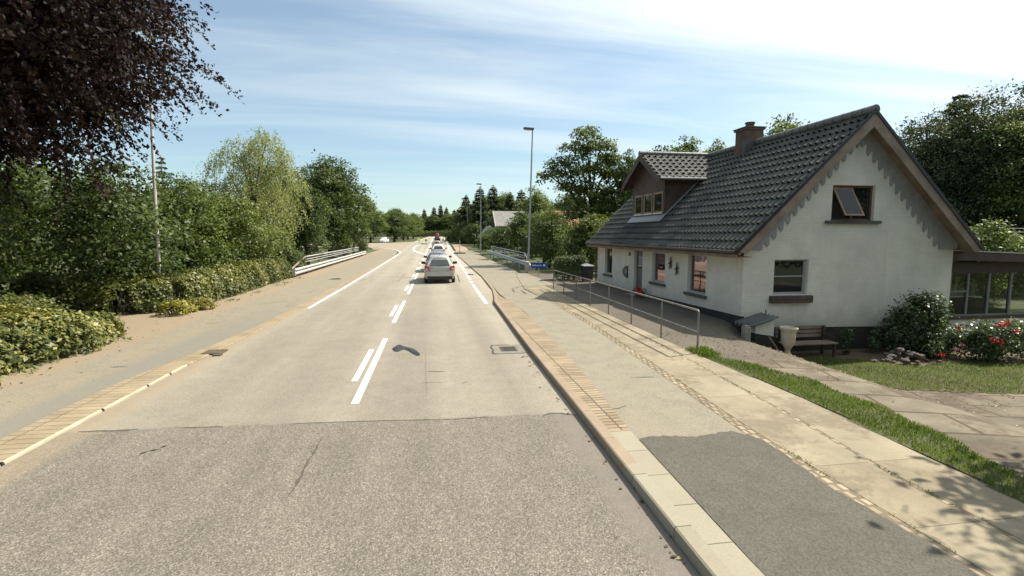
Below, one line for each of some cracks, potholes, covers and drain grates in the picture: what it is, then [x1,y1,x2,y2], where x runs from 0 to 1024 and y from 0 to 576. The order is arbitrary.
drain grate [490,345,529,354]
crack [182,417,485,496]
crack [425,347,445,394]
